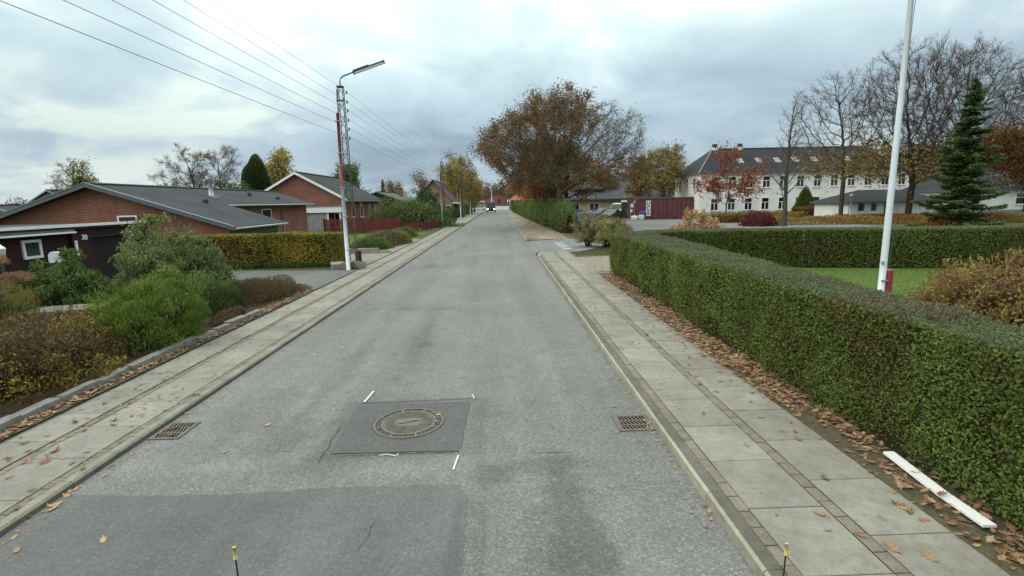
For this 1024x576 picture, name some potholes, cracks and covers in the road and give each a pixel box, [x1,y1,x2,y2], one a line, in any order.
drain grate [147,421,201,440]
drain grate [612,414,655,432]
crack [318,427,450,463]
manhole cover [373,408,444,439]
